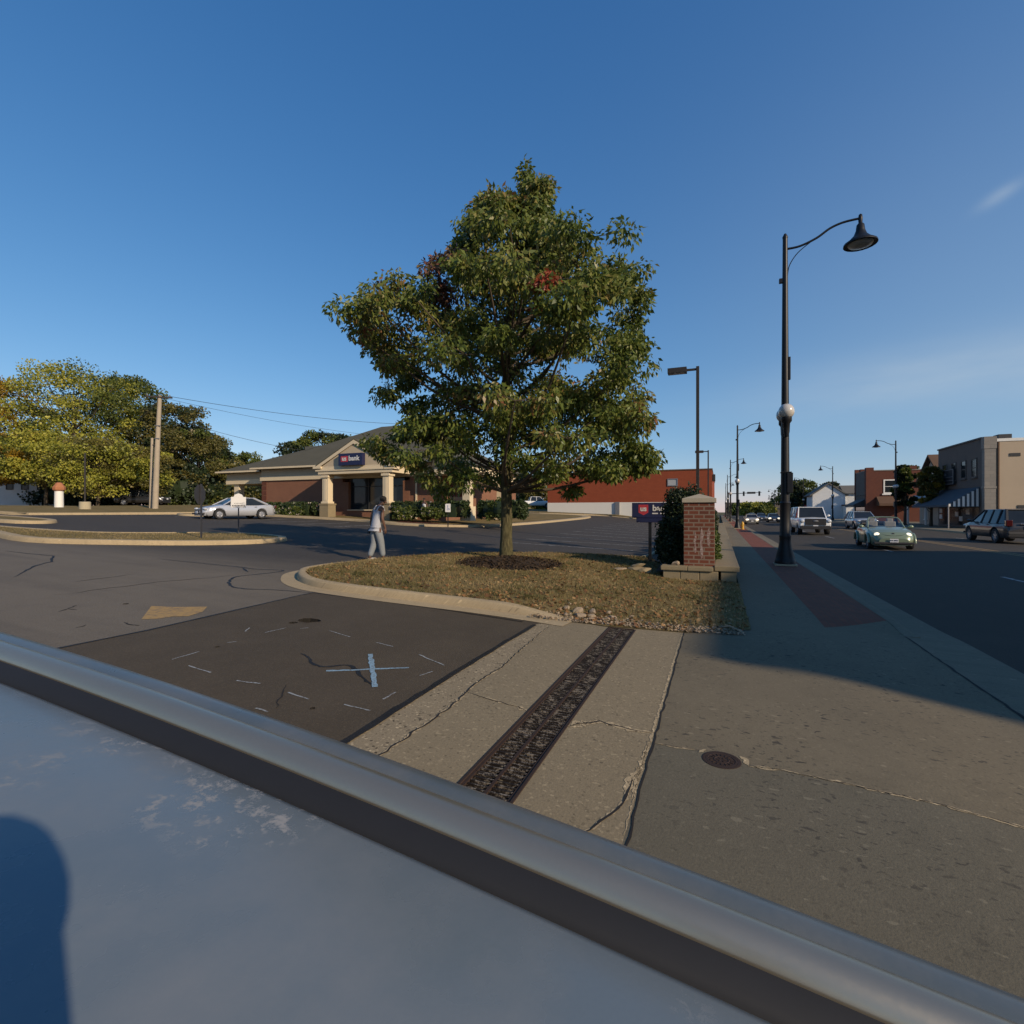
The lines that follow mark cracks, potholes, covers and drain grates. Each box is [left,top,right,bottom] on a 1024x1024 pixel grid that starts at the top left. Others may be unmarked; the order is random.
manhole cover [699,749,749,769]
crack [569,720,1024,829]
crack [379,629,545,756]
crack [11,551,54,577]
